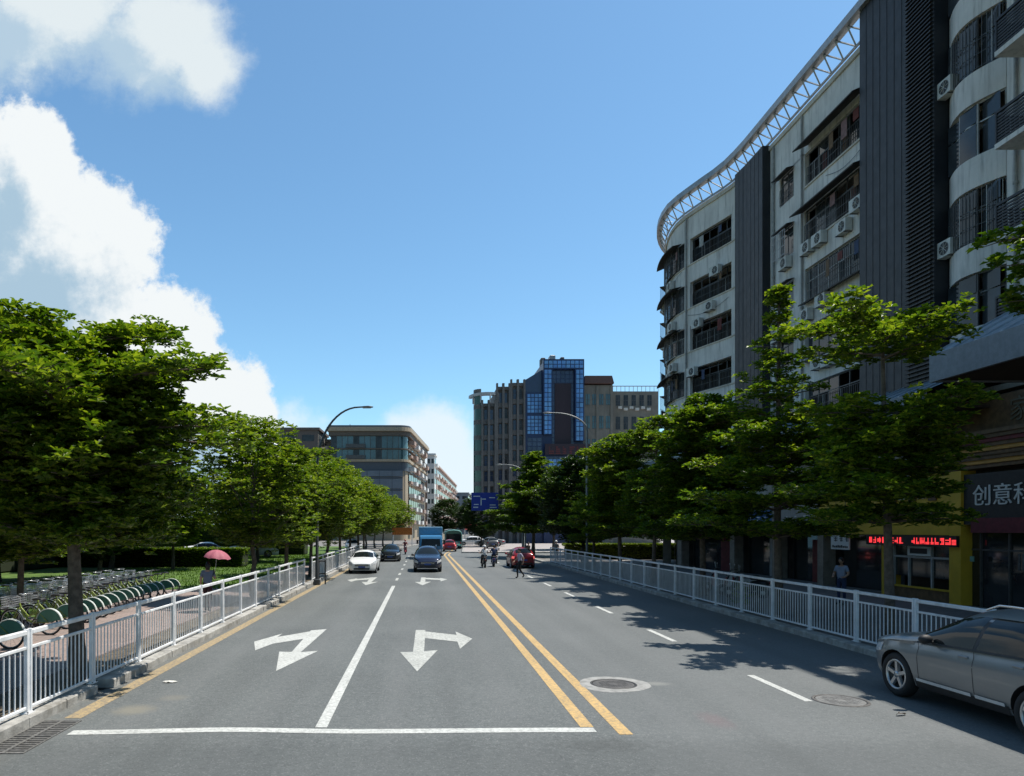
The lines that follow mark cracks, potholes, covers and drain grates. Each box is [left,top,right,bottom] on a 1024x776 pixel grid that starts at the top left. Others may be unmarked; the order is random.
manhole cover [580,677,651,692]
drain grate [0,720,82,754]
manhole cover [811,694,871,707]
